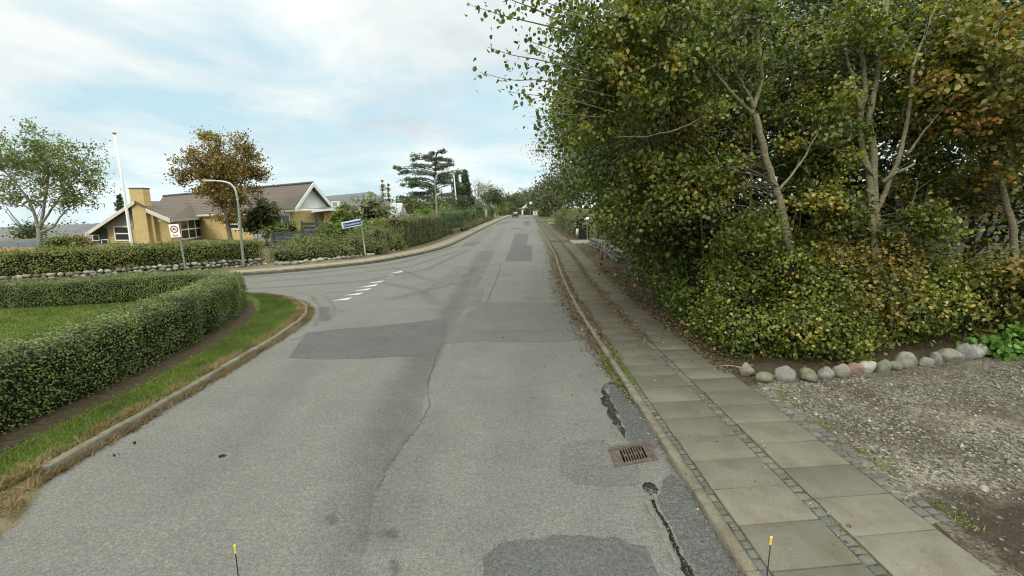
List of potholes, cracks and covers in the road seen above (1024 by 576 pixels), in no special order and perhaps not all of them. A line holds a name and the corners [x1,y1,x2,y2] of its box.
drain grate [608,441,663,468]
crack [596,380,629,439]
crack [645,493,697,576]
crack [376,452,399,490]
